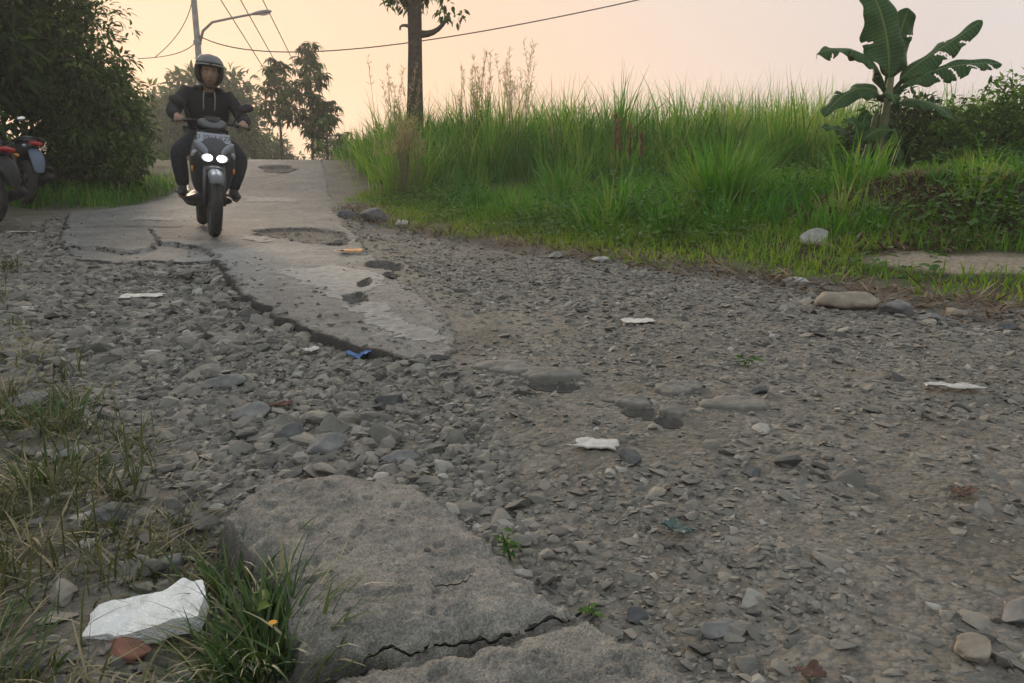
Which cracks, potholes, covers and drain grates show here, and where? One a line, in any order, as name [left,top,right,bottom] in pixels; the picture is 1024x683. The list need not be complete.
pothole [343,291,368,303]
pothole [366,260,405,272]
crack [362,612,582,668]
pothole [253,227,348,246]
pothole [259,165,299,173]
crack [64,229,214,257]
